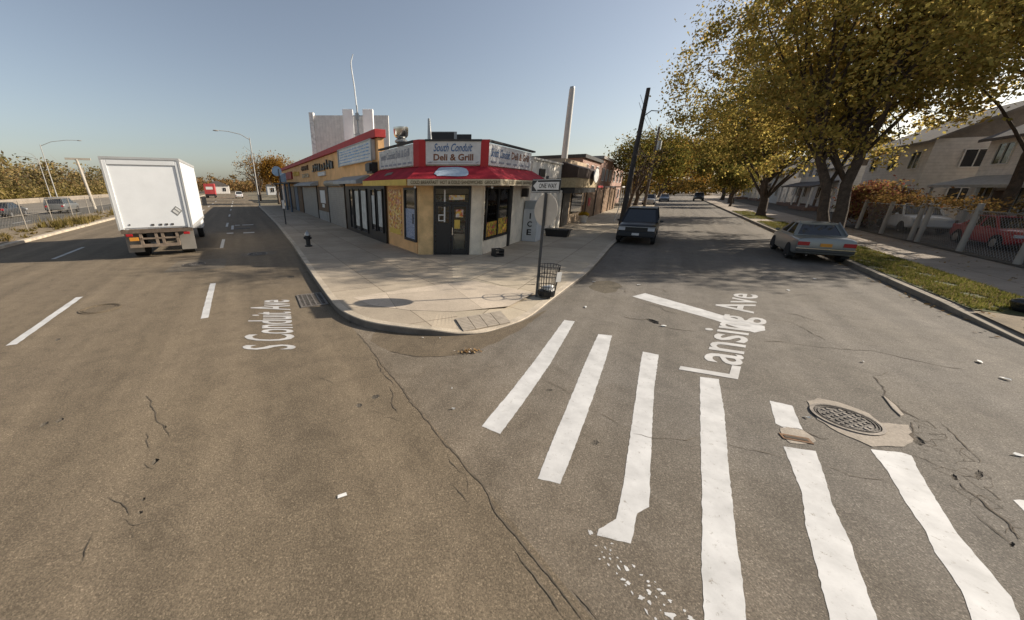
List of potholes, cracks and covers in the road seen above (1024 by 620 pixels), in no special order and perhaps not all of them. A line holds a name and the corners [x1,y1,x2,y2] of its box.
drain grate [296,292,329,308]
crack [441,439,599,620]
crack [145,395,171,469]
crack [109,493,155,542]
crack [298,352,453,440]
crack [767,312,1023,565]
manhole cover [809,403,887,436]
